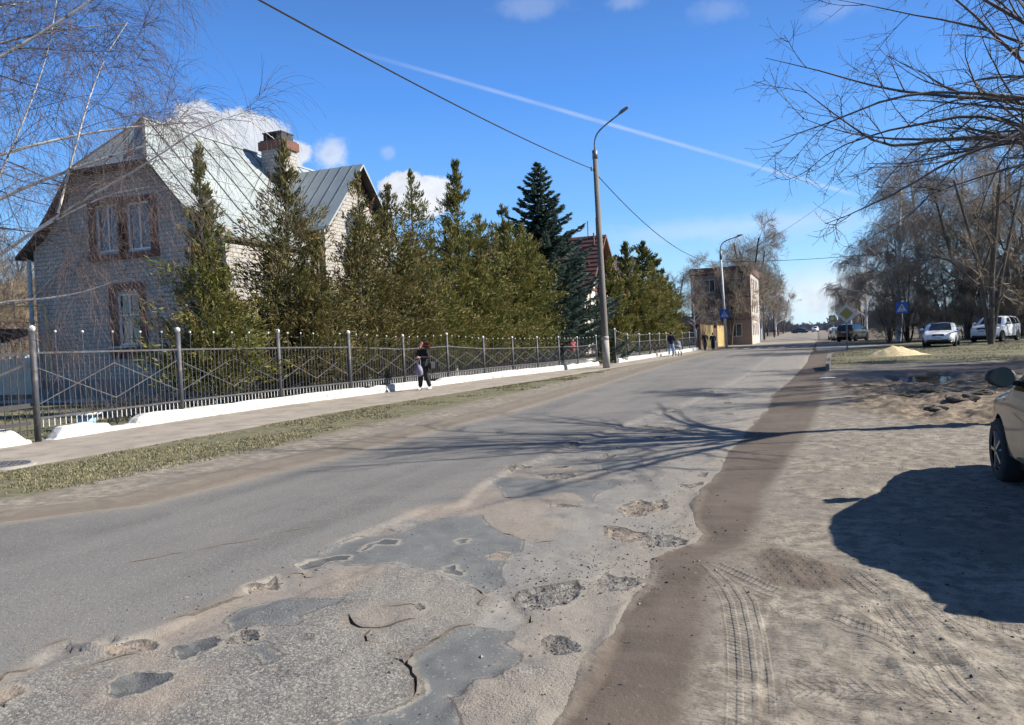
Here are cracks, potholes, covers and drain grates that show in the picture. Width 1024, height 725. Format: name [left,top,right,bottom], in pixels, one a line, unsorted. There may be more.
crack [348,603,471,697]
pothole [598,572,646,593]
pothole [604,527,652,543]
pothole [513,579,585,611]
pothole [109,672,173,698]
pothole [245,576,281,592]
pothole [618,499,669,517]
pothole [540,635,584,656]
pothole [103,639,160,655]
pothole [641,534,690,549]
manhole cover [0,460,37,470]
pothole [174,636,221,660]
